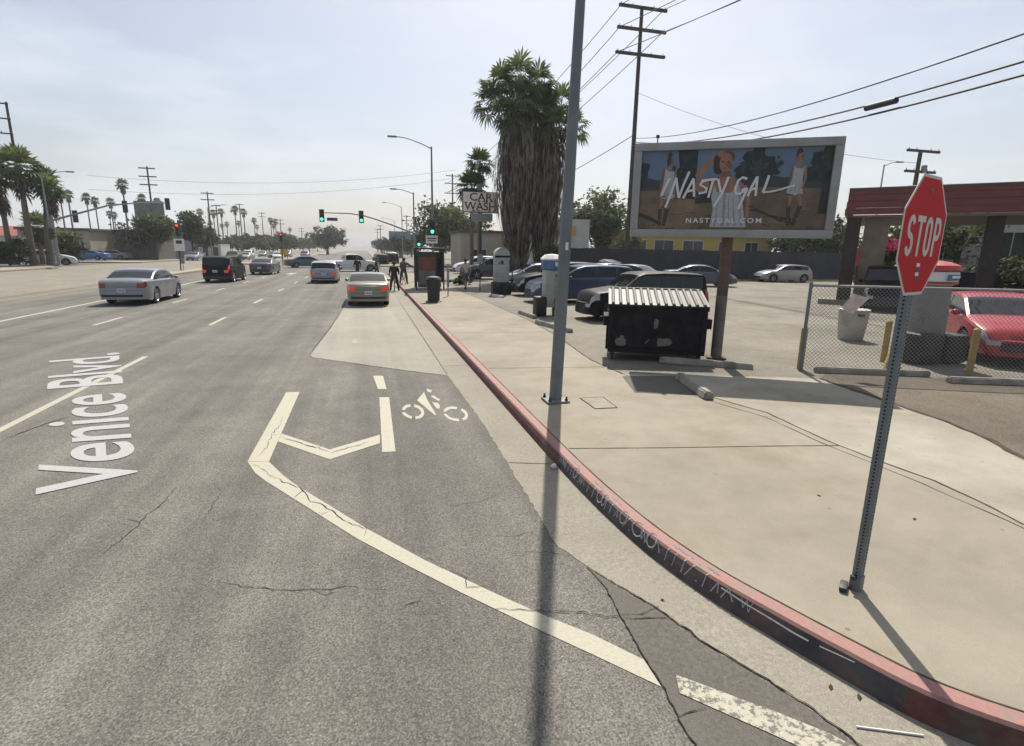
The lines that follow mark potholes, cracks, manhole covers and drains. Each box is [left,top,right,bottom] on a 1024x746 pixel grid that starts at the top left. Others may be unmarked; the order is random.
utility cover [581,397,617,409]
crack [220,581,386,595]
